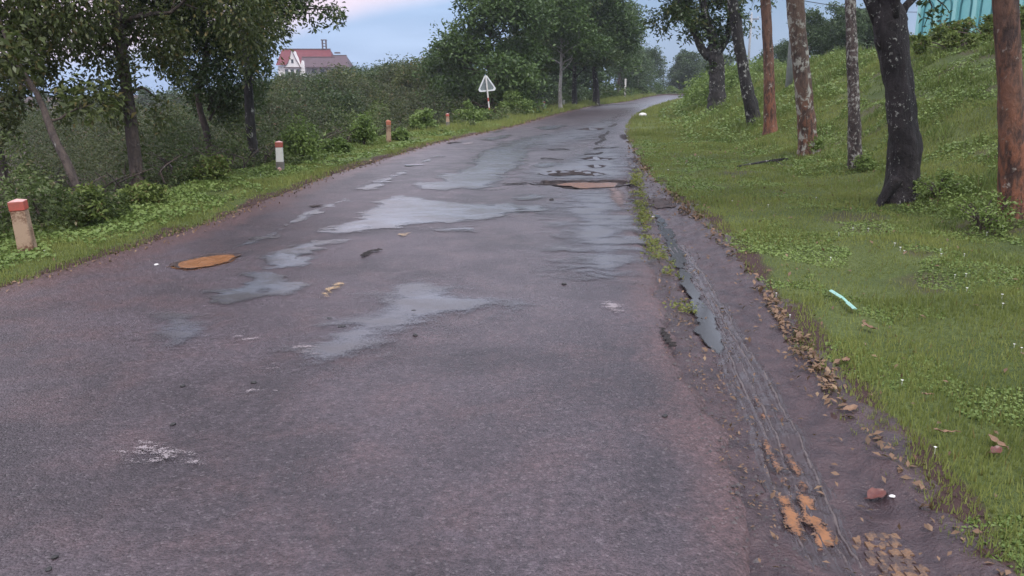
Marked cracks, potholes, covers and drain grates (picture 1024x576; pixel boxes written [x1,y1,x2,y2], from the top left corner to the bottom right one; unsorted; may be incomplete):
crack [540,123,617,160]
